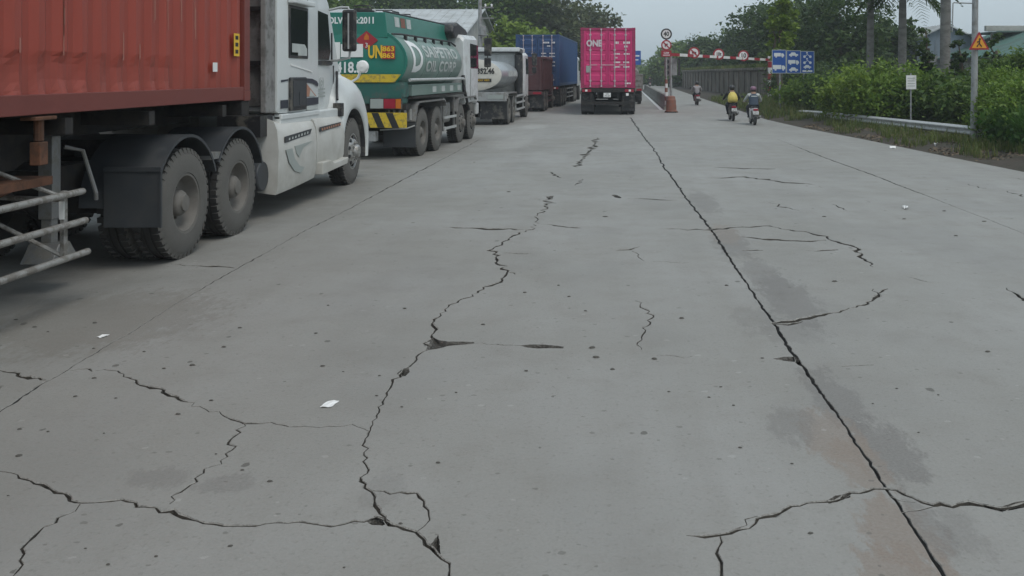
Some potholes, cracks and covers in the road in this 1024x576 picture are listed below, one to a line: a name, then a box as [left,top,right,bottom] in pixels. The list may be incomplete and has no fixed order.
crack [668,225,873,267]
crack [0,196,579,576]
crack [686,487,1024,576]
crack [771,289,887,326]
crack [550,138,599,186]
crack [636,301,692,358]
